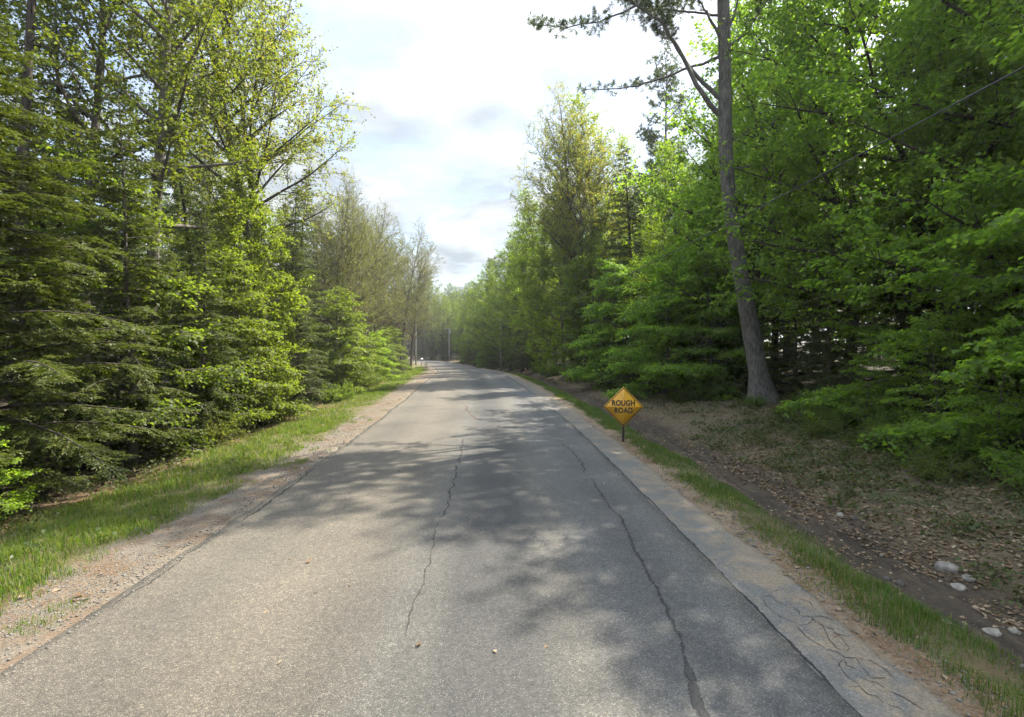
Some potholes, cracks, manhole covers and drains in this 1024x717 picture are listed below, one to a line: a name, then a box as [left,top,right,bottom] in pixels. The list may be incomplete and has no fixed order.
crack [540,442,710,717]
crack [240,467,316,522]
crack [405,441,463,634]
crack [764,589,921,715]
